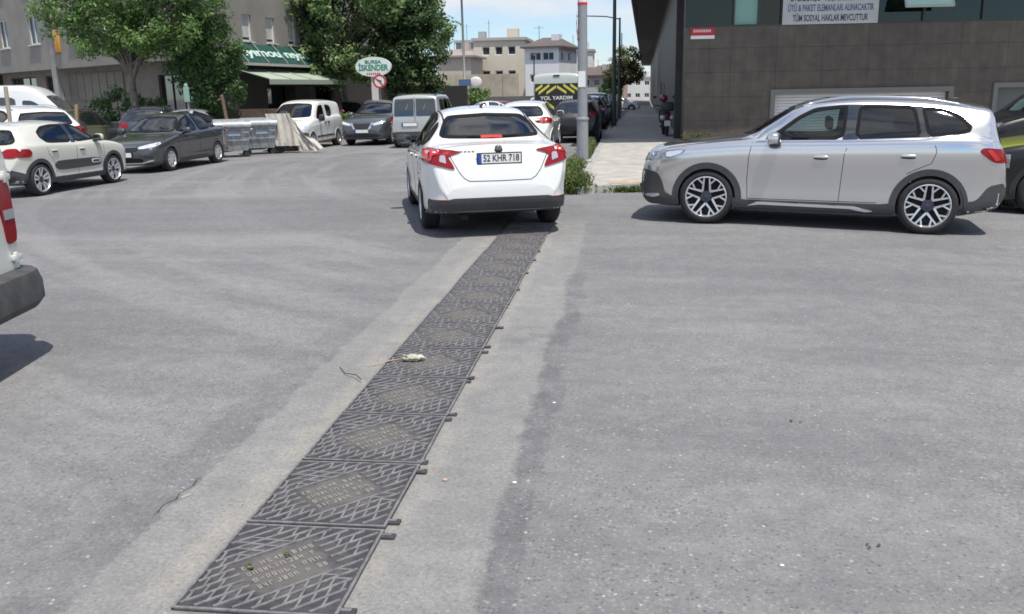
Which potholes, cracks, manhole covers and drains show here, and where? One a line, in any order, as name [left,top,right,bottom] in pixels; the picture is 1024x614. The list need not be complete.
crack [154,477,202,515]
